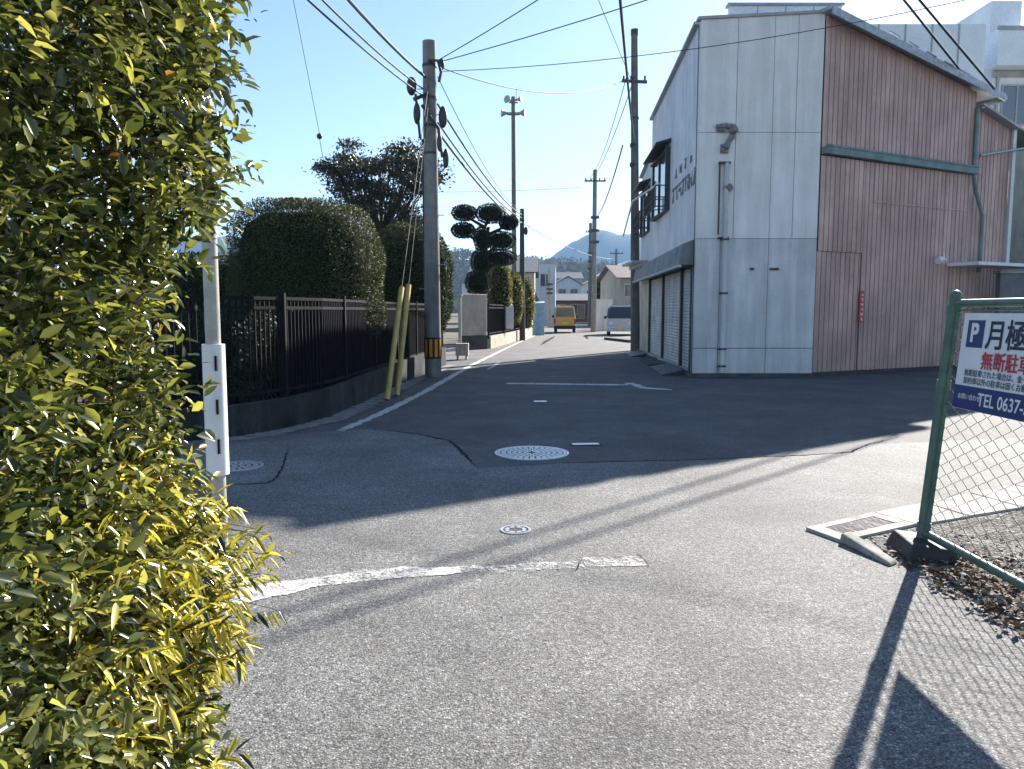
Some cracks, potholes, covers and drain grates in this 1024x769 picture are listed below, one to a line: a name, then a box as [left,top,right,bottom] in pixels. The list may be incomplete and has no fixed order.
manhole cover [229,461,264,471]
manhole cover [495,446,569,461]
crack [242,450,289,484]
drain grate [806,512,915,543]
manhole cover [500,525,531,535]
